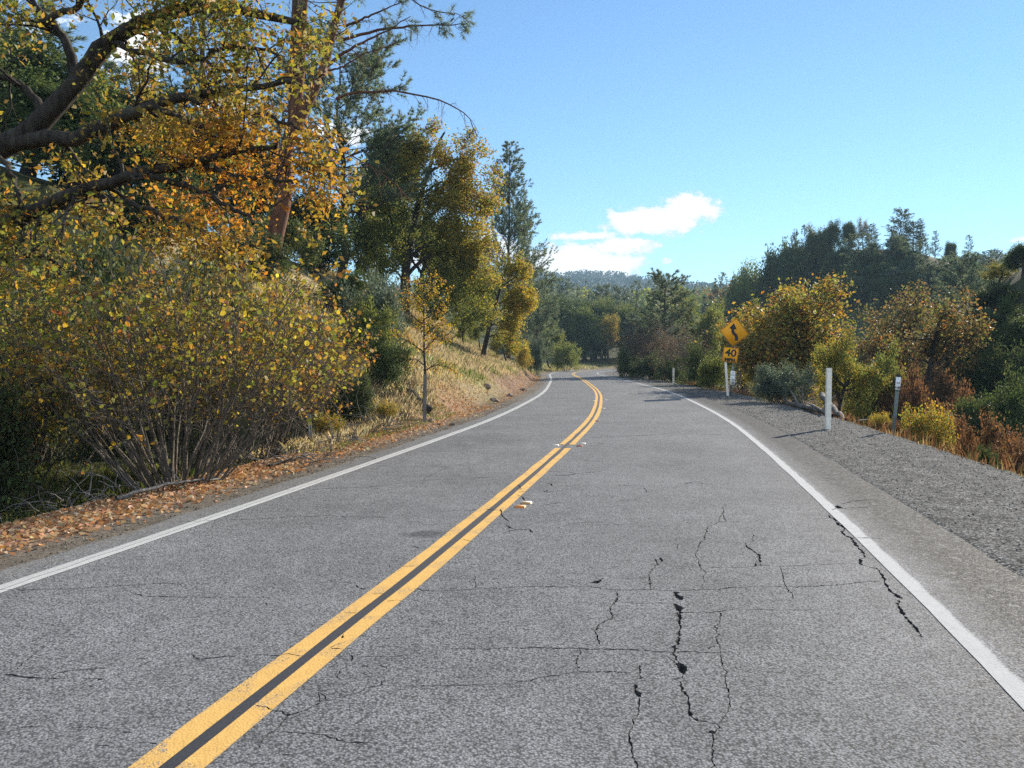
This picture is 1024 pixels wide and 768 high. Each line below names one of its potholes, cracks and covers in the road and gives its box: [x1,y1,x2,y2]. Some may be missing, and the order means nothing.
crack [500,485,533,533]
crack [825,500,922,637]
crack [256,505,879,768]
crack [140,643,280,666]
crack [6,647,105,687]
